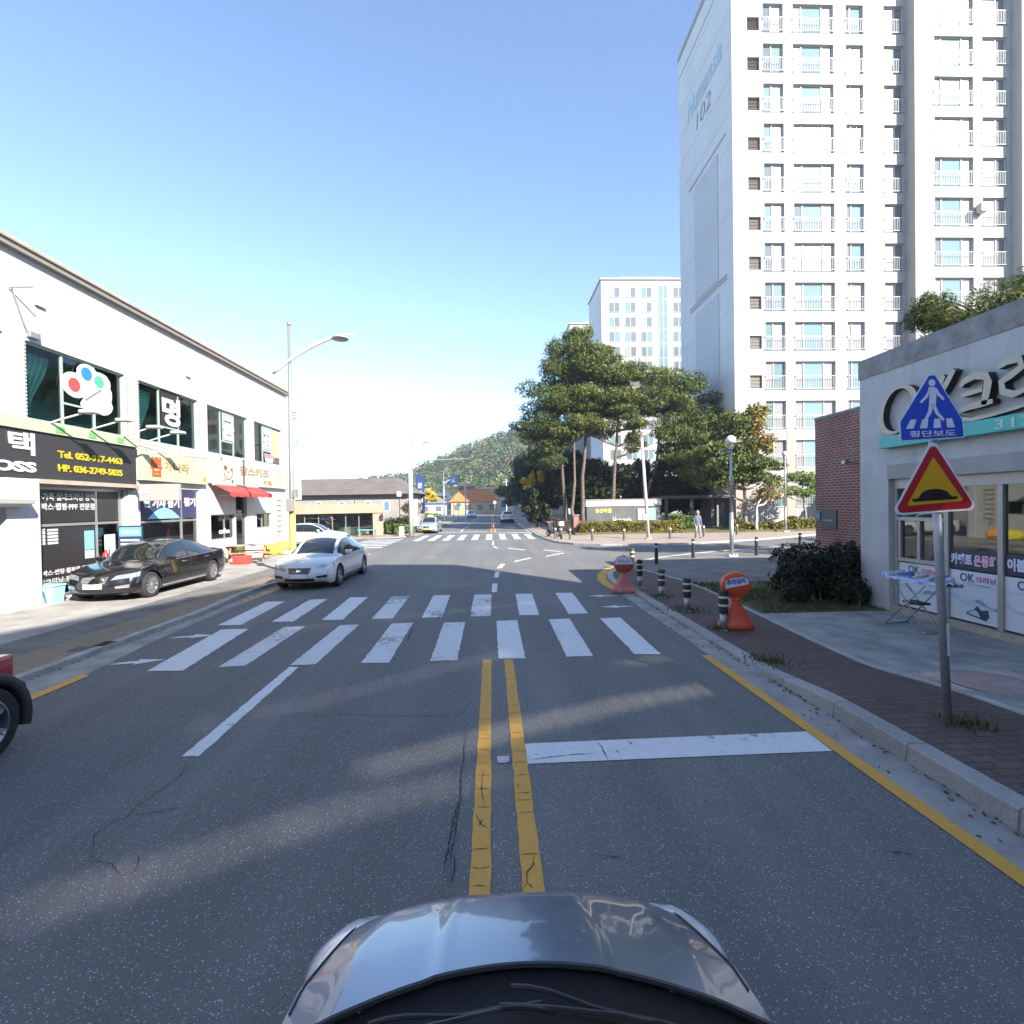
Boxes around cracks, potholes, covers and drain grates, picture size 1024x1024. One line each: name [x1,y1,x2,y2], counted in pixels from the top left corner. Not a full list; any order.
crack [91,765,187,875]
crack [442,686,491,890]
crack [507,679,632,888]
